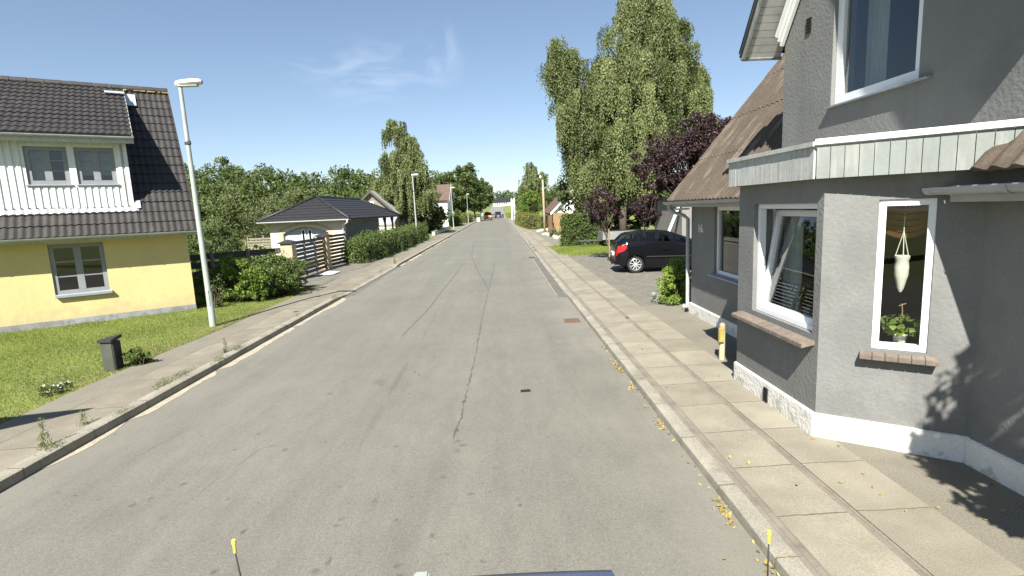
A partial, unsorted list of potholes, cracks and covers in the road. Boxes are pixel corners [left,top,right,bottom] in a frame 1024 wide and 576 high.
crack [401,244,495,450]
crack [187,446,266,503]
